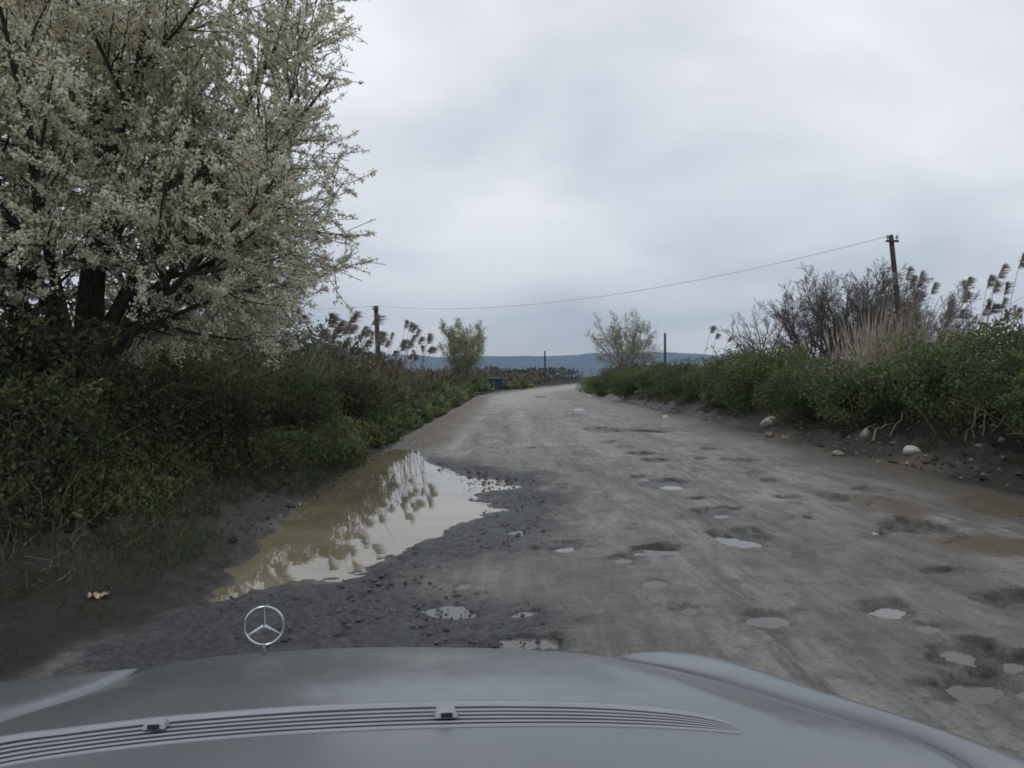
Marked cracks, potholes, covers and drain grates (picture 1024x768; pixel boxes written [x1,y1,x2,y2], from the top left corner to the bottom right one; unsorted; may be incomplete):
pothole [739,608,793,629]
pothole [928,669,1024,707]
pothole [855,597,912,619]
pothole [921,567,958,575]
pothole [527,539,590,553]
pothole [639,577,669,589]
pothole [638,478,689,490]
pothole [485,633,564,650]
pothole [875,516,955,535]
pothole [419,604,482,620]
pothole [630,542,681,557]
